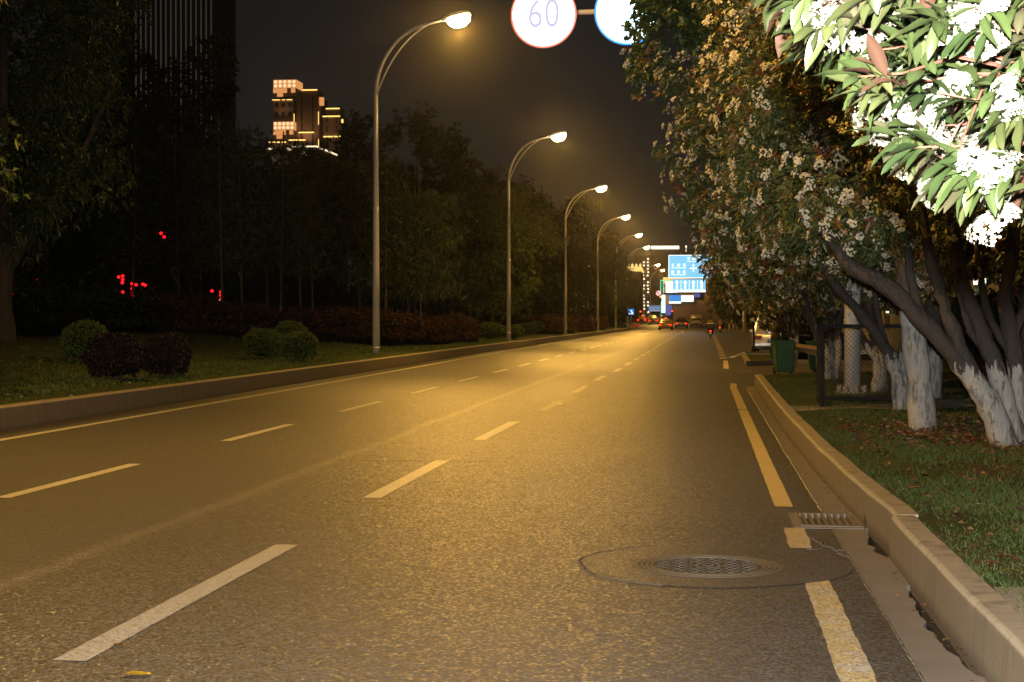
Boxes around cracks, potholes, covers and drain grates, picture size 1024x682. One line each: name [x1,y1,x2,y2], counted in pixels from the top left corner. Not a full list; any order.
manhole cover [633,554,785,578]
crack [805,536,848,557]
